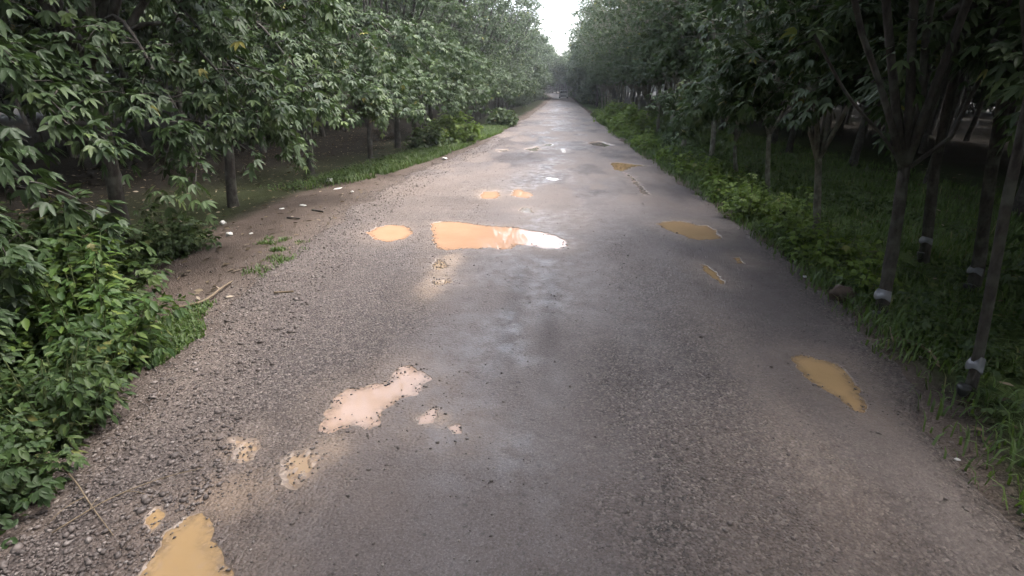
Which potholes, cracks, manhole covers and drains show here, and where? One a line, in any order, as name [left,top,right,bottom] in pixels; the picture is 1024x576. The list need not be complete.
pothole [700,264,725,284]
pothole [279,448,326,490]
pothole [430,221,569,250]
pothole [656,220,721,240]
pothole [510,187,533,198]
pothole [365,224,413,242]
pothole [317,365,433,434]
pothole [609,162,646,171]
pothole [447,423,463,434]
pothole [479,191,501,199]
pothole [137,511,235,576]
pothole [143,506,168,533]
